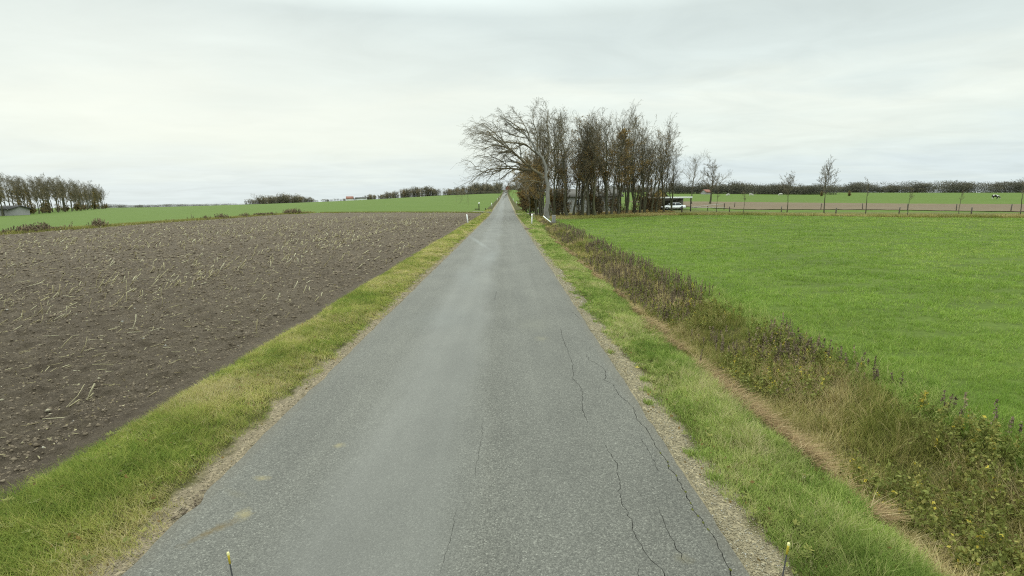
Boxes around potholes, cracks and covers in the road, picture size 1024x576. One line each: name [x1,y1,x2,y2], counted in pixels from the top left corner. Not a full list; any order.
crack [586,356,732,576]
